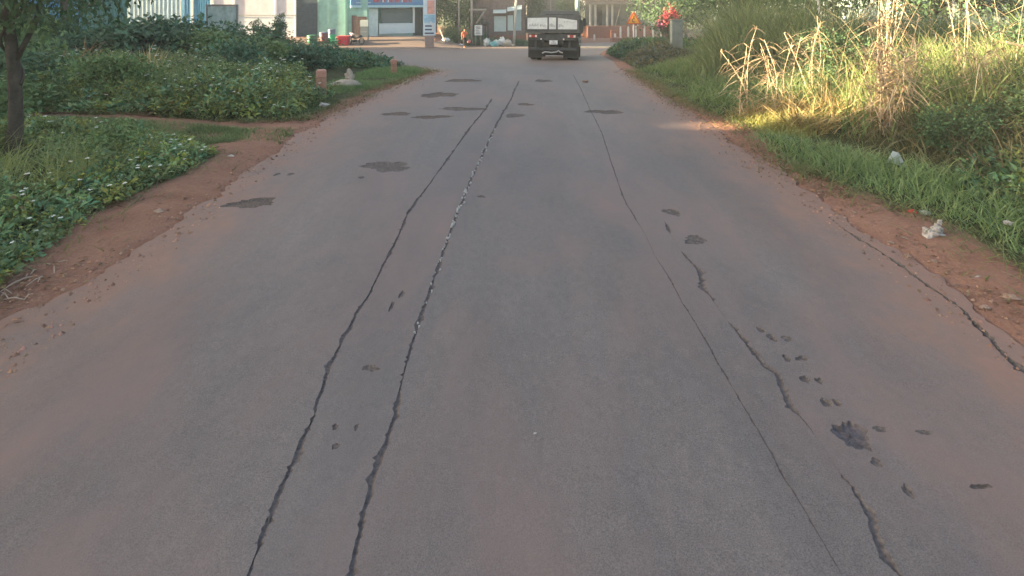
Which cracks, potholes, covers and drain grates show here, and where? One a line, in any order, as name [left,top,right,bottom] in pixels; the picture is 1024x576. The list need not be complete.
pothole [830,421,873,452]
pothole [684,235,707,245]
crack [573,75,902,576]
crack [828,217,1024,373]
